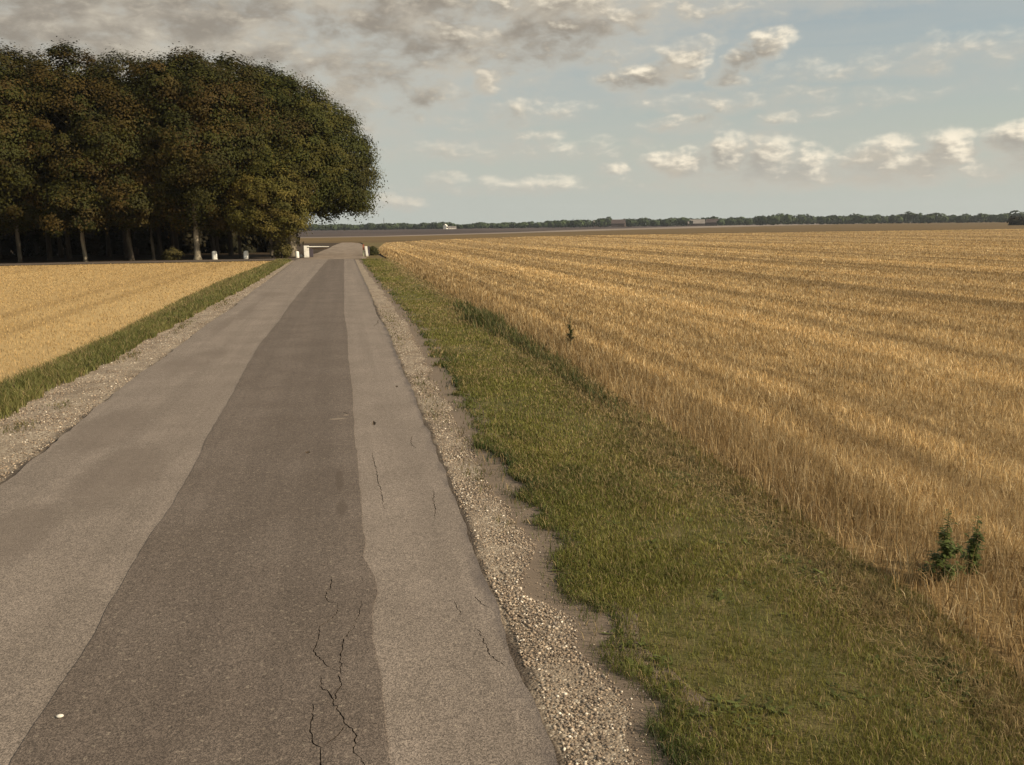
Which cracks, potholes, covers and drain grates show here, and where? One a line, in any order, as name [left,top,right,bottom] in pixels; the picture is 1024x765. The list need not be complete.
crack [309,577,365,765]
